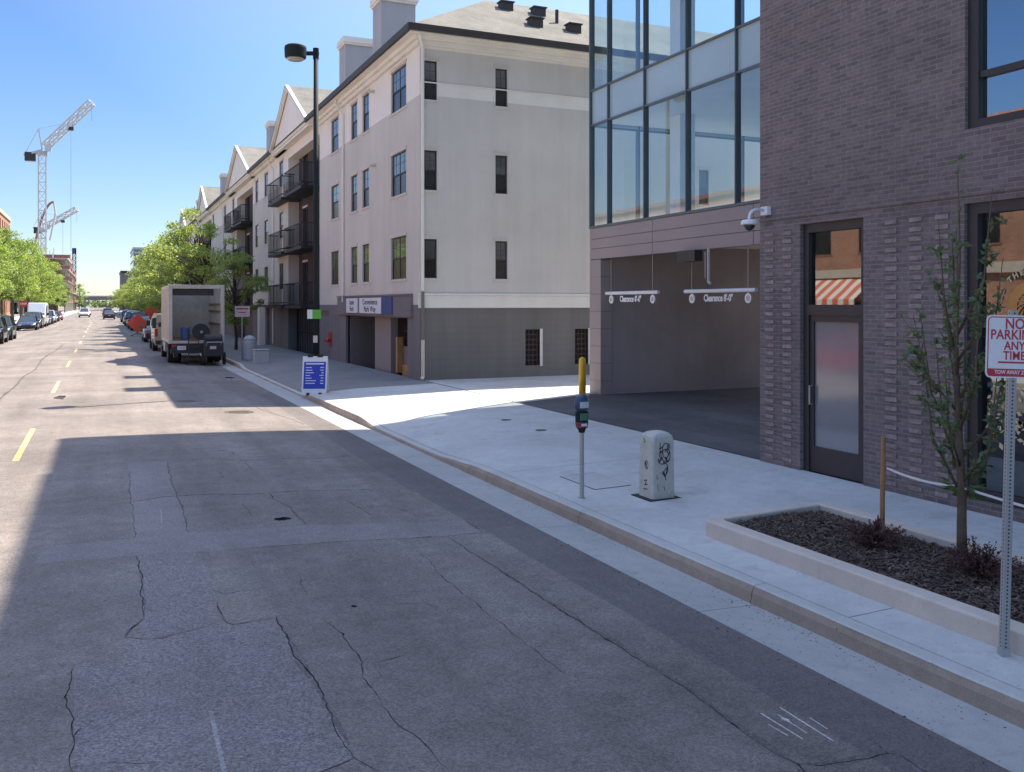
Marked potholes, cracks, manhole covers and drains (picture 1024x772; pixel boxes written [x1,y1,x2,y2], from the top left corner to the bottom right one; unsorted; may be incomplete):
crack [384,557,565,674]
crack [125,561,296,640]
utility cover [559,472,629,490]
crack [117,463,410,535]
crack [449,538,926,772]
crack [64,664,156,772]
crack [320,618,445,767]
